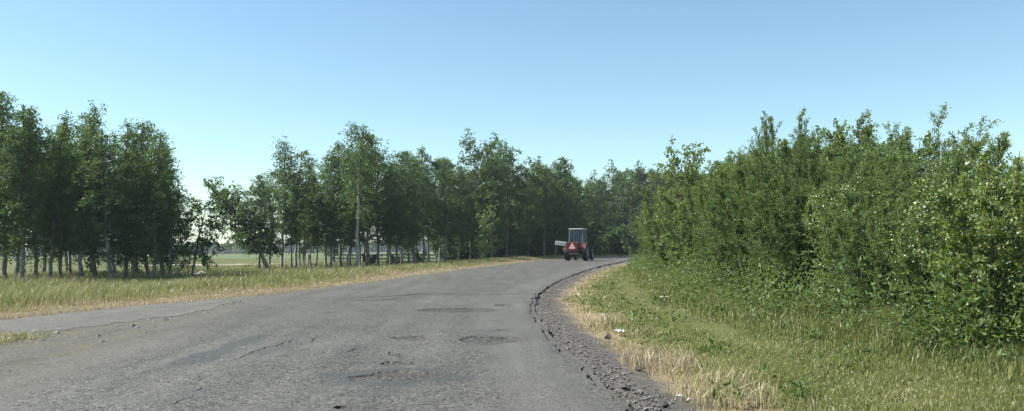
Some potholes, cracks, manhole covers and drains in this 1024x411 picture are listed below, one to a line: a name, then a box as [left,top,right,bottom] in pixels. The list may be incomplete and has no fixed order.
pothole [459,336,526,345]
pothole [345,370,441,382]
